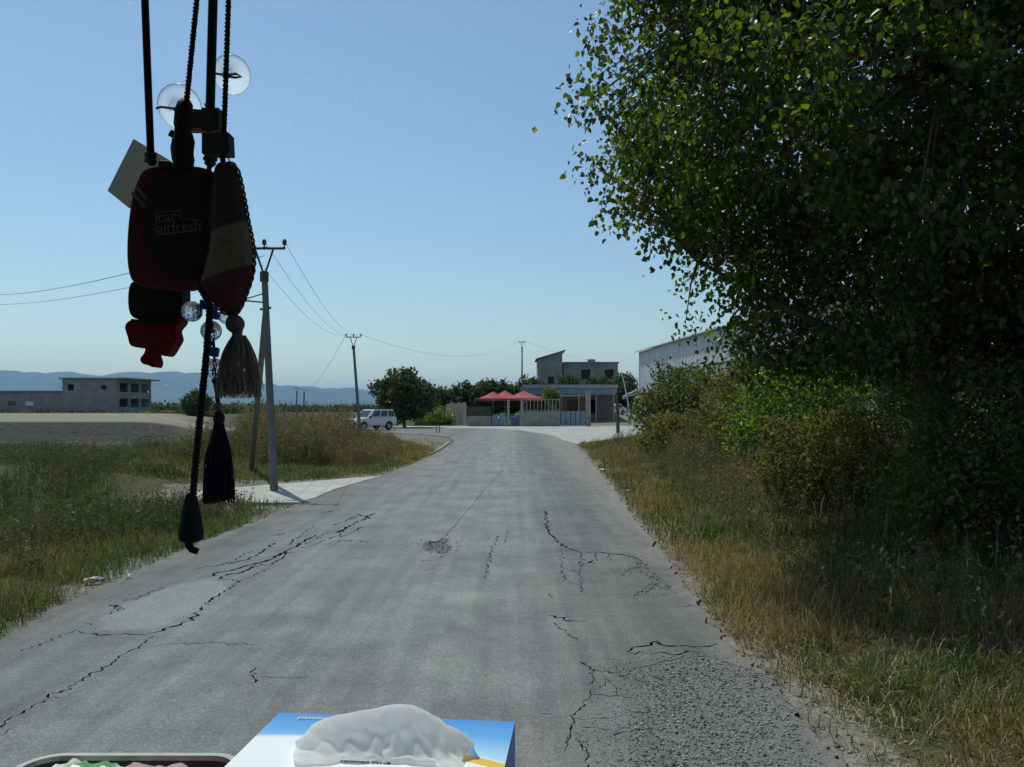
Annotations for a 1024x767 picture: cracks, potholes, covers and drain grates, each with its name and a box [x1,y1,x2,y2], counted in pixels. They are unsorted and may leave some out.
crack [627,641,717,655]
pothole [406,534,457,558]
crack [0,509,376,736]
crack [542,662,632,767]
crack [544,504,630,639]
crack [484,531,509,579]
